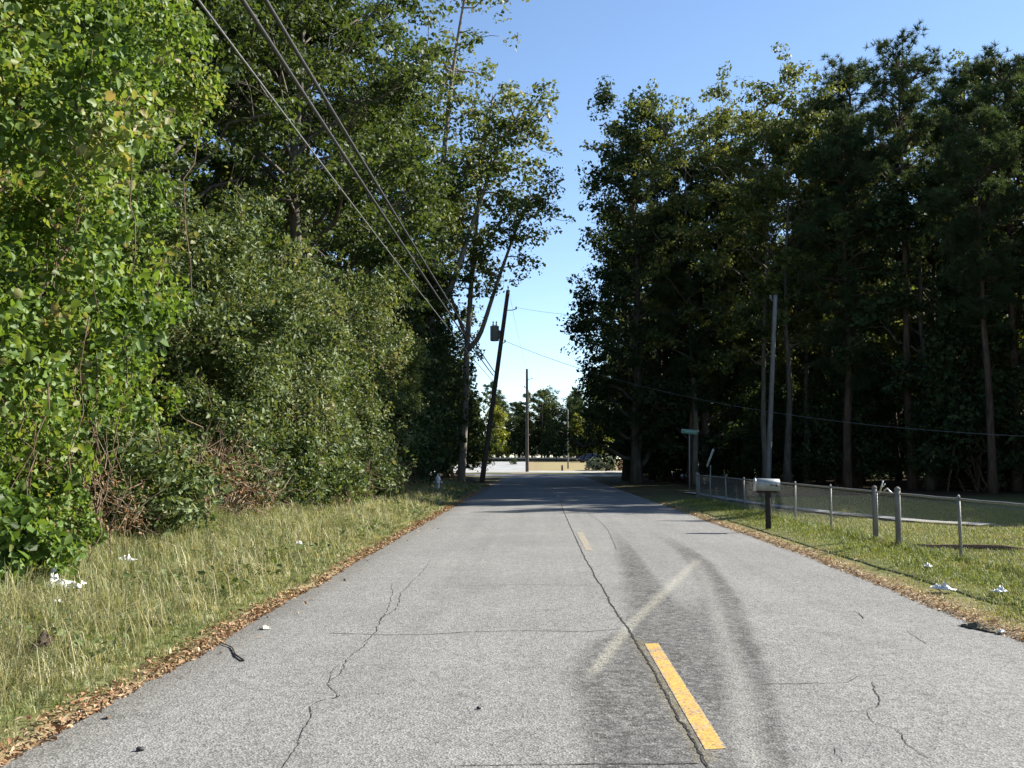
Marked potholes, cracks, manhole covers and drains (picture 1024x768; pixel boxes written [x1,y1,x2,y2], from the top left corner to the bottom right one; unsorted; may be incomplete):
crack [768,674,930,759]
crack [281,559,622,768]
